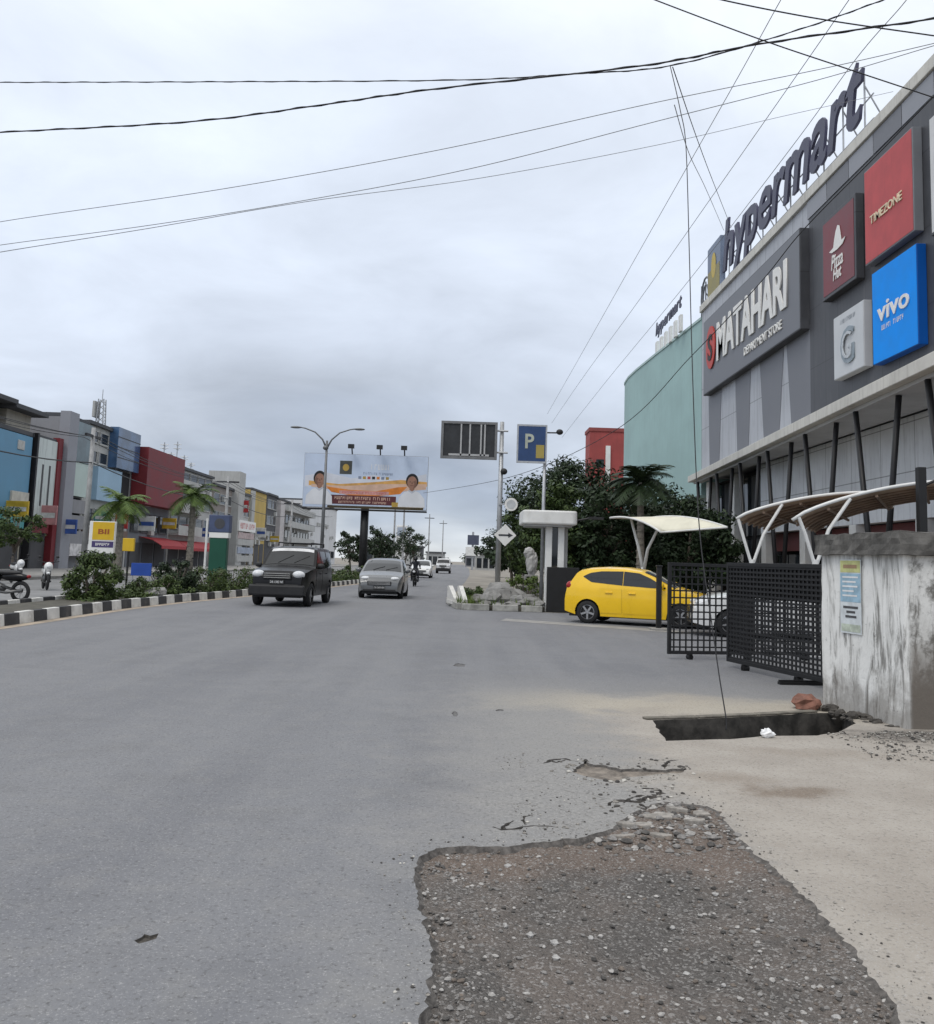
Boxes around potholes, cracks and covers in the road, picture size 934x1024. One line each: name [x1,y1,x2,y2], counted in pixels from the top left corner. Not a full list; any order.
crack [494,815,554,830]
crack [608,788,666,809]
pothole [413,801,901,1024]
pothole [572,761,687,781]
